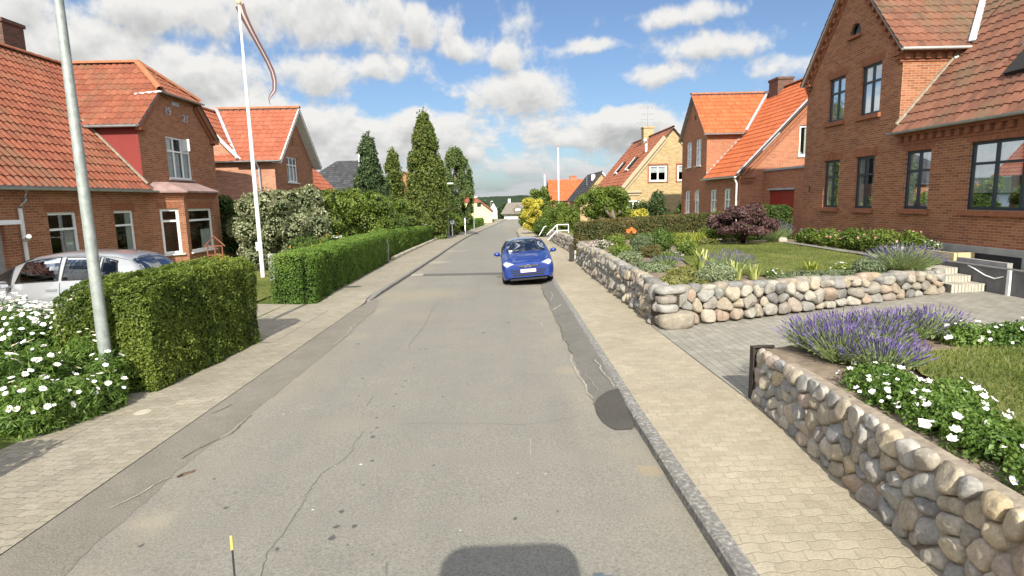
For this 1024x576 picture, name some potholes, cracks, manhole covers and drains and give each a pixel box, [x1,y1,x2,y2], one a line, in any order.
crack [181,404,250,459]
crack [108,476,172,509]
crack [260,436,361,576]
